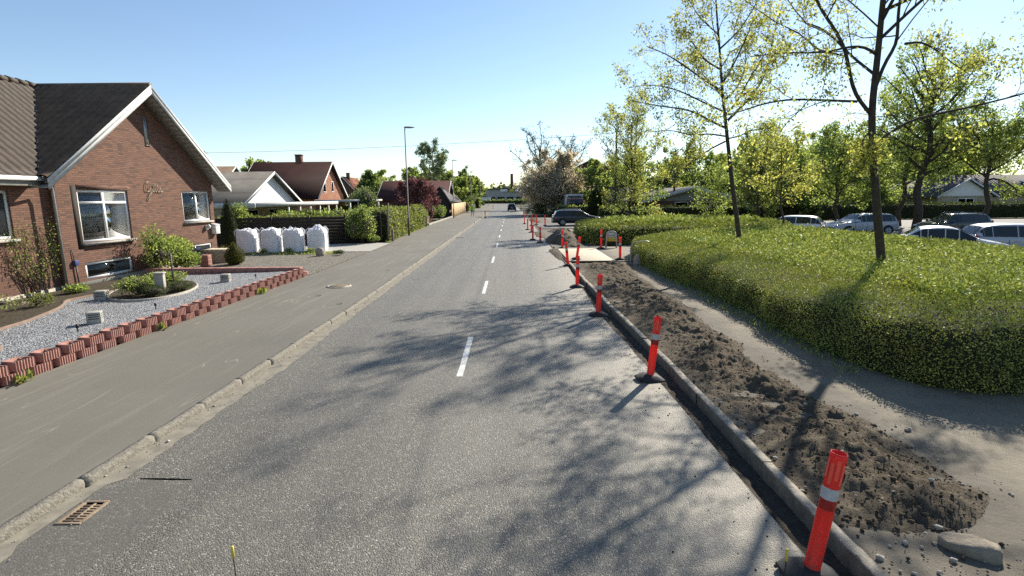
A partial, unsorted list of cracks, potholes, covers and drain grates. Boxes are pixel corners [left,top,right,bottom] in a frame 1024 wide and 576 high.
drain grate [54,500,110,526]
